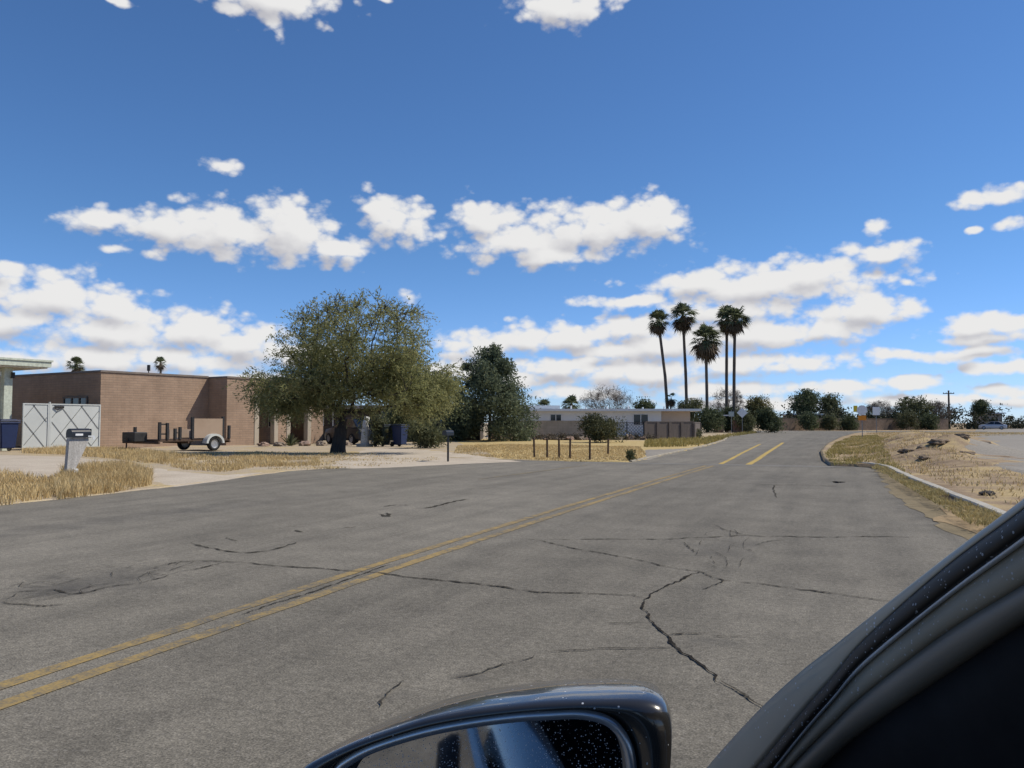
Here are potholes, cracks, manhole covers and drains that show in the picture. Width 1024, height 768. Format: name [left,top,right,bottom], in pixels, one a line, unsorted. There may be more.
crack [3,530,643,614]
crack [529,525,897,706]
crack [381,499,465,516]
crack [379,656,534,706]
